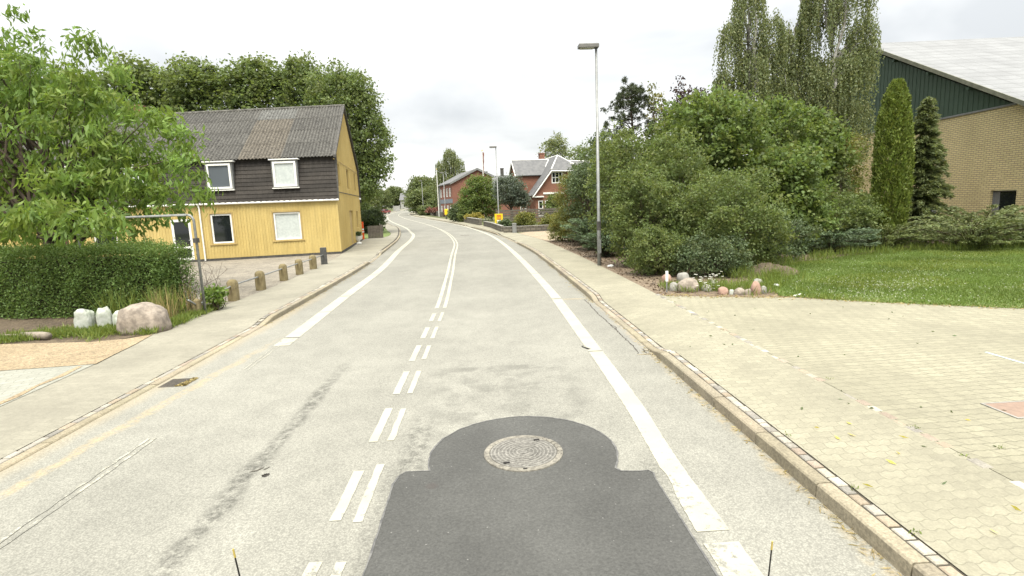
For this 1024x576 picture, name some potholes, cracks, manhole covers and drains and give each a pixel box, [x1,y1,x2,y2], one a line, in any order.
manhole cover [484,435,563,472]
utility cover [980,401,1024,419]
crack [586,301,649,355]
drain grate [158,377,198,388]
